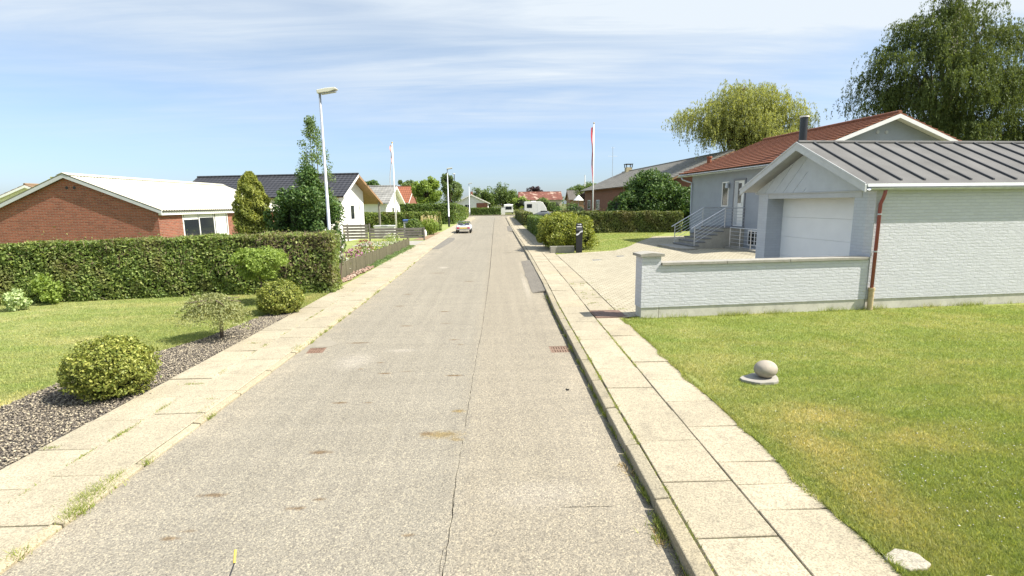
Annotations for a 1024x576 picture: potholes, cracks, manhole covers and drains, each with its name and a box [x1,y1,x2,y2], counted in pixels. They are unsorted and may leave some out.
crack [439,218,495,576]
